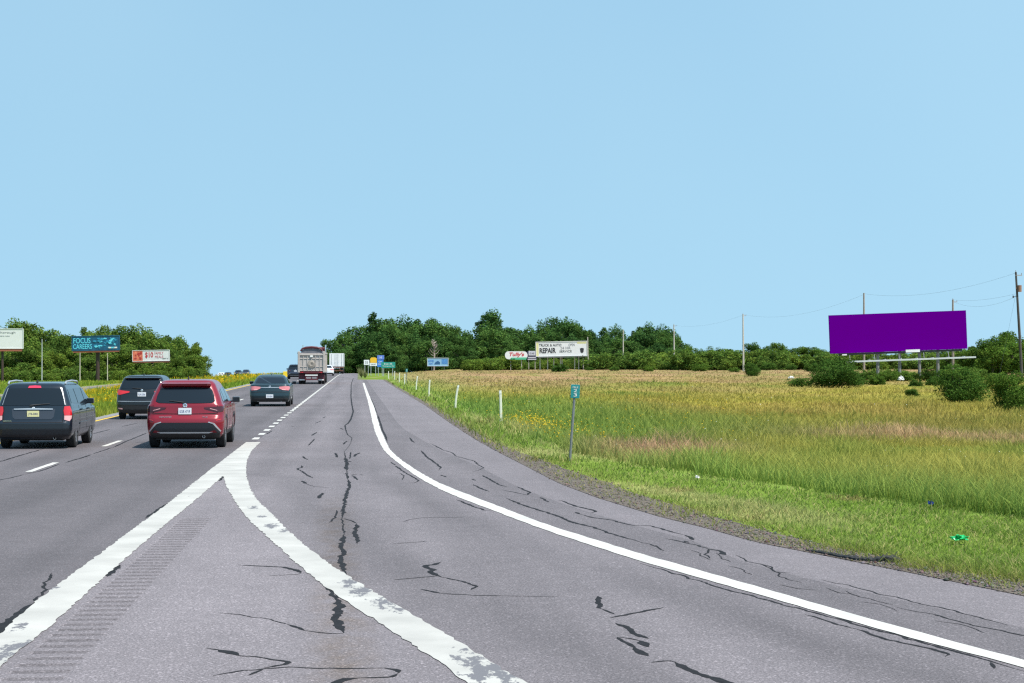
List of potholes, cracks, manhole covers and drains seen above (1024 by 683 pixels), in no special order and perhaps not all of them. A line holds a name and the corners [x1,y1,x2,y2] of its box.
crack [595,596,734,683]
crack [805,614,950,656]
crack [208,648,401,683]
crack [227,380,361,634]
crack [391,438,1024,636]
